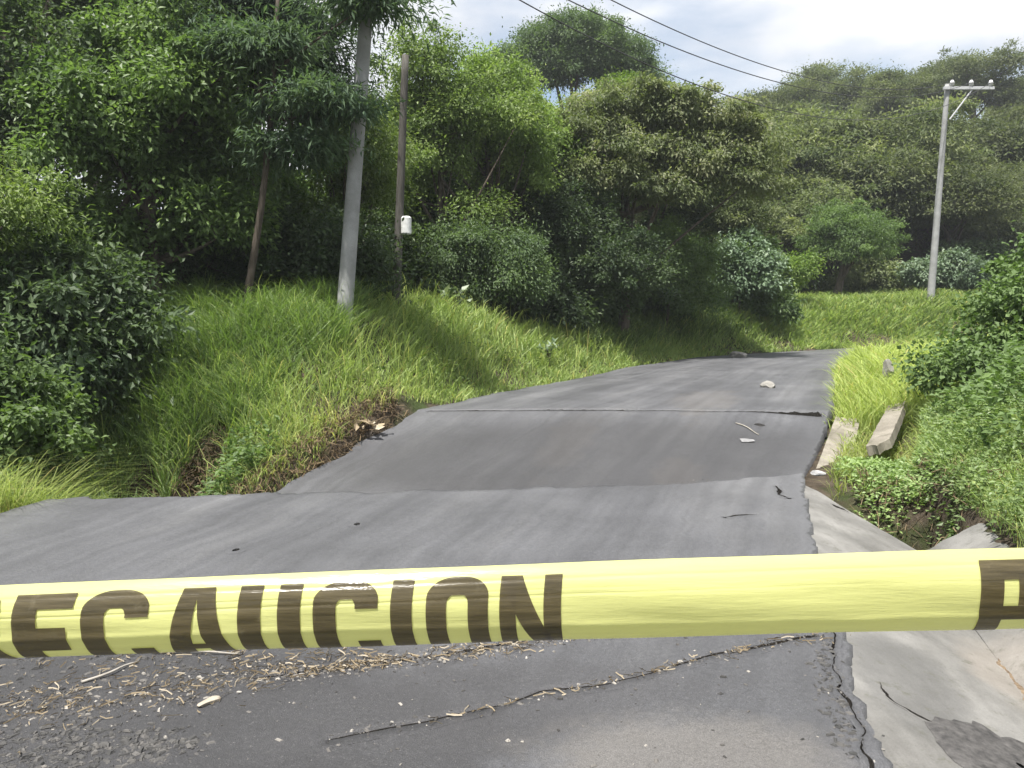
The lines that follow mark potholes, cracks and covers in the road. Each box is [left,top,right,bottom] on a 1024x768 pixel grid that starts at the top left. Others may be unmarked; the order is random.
crack [995,658,1024,701]
crack [249,632,932,768]
crack [721,485,794,519]
crack [428,408,824,418]
crack [187,485,623,498]
